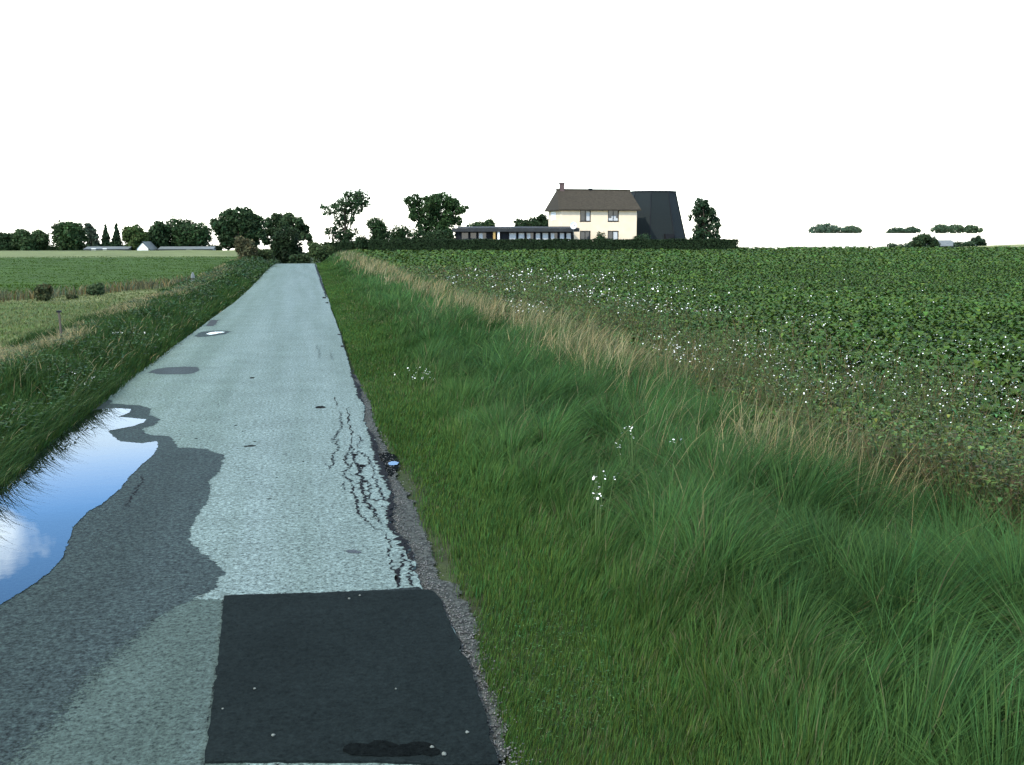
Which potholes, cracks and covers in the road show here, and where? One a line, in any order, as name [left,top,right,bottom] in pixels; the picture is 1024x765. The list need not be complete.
pothole [343,740,440,757]
crack [126,476,144,507]
crack [325,397,415,587]
